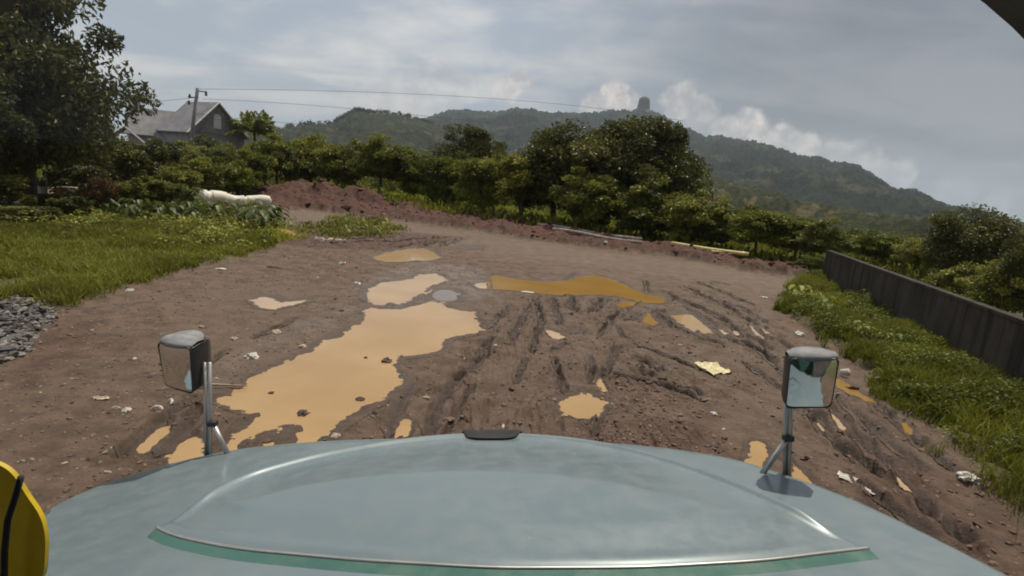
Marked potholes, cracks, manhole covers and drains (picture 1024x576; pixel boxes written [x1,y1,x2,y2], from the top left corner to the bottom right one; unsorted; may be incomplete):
pothole [665,310,723,336]
pothole [615,300,638,308]
pothole [366,246,446,263]
pothole [358,271,454,306]
pothole [196,300,490,454]
pothole [469,280,491,289]
pothole [550,386,613,421]
pothole [485,273,672,304]
pothole [424,287,469,303]
pothole [245,295,318,310]
